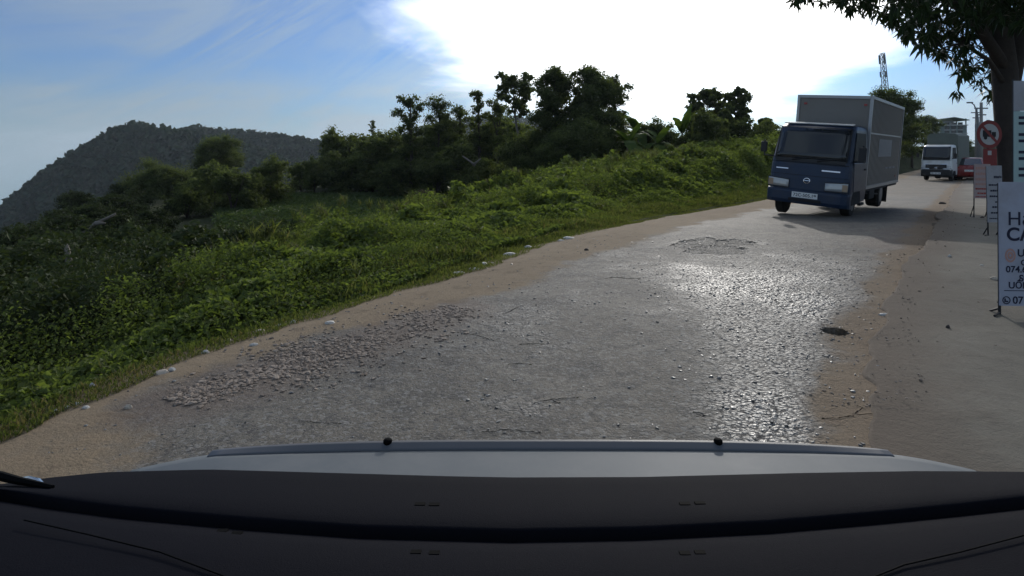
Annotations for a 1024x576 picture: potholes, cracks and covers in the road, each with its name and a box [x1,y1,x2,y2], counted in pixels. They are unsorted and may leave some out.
crack [823,405,873,420]
crack [534,396,576,404]
pothole [817,327,852,337]
pothole [658,236,767,258]
